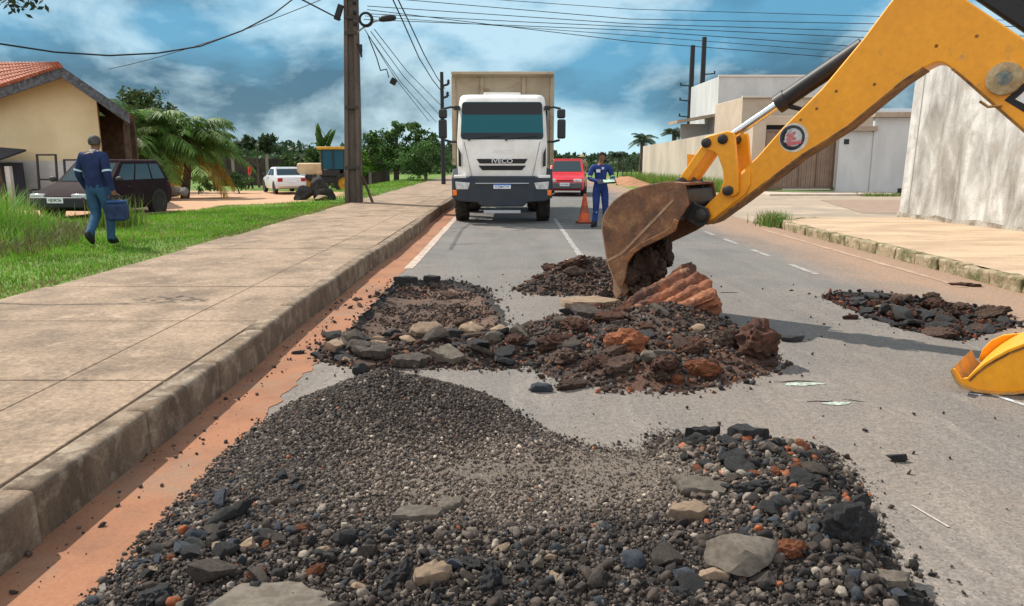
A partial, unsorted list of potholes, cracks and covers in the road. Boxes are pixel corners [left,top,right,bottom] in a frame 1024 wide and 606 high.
pothole [350,280,508,337]
